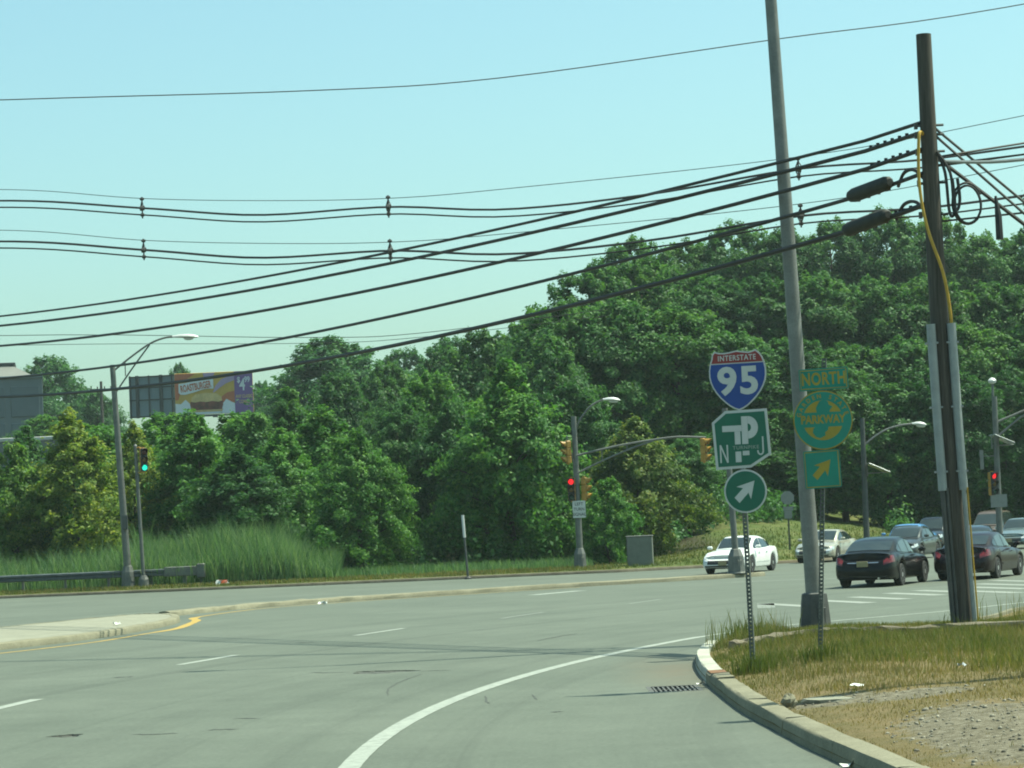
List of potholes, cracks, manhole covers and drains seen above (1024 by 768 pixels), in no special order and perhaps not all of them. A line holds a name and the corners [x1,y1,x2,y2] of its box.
drain grate [646,685,703,693]
